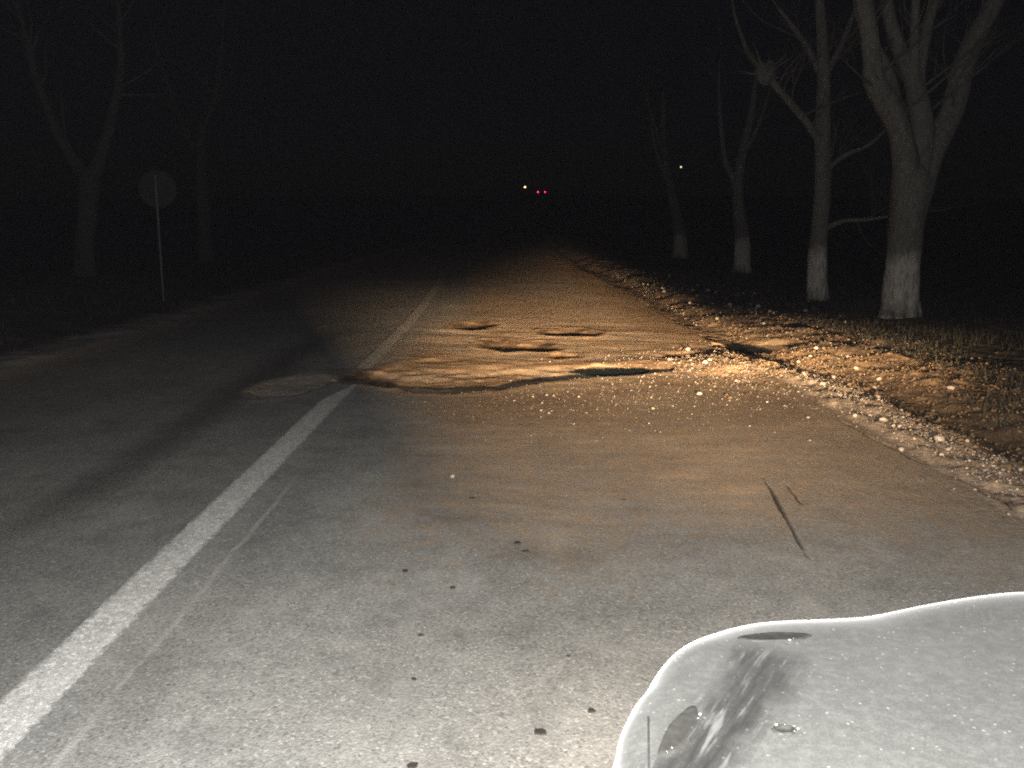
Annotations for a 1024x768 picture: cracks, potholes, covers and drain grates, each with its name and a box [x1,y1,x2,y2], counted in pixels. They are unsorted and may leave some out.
crack [762,477,810,559]
pothole [449,320,499,331]
pothole [325,370,399,388]
pothole [374,357,682,394]
pothole [537,328,605,336]
pothole [475,338,564,352]
